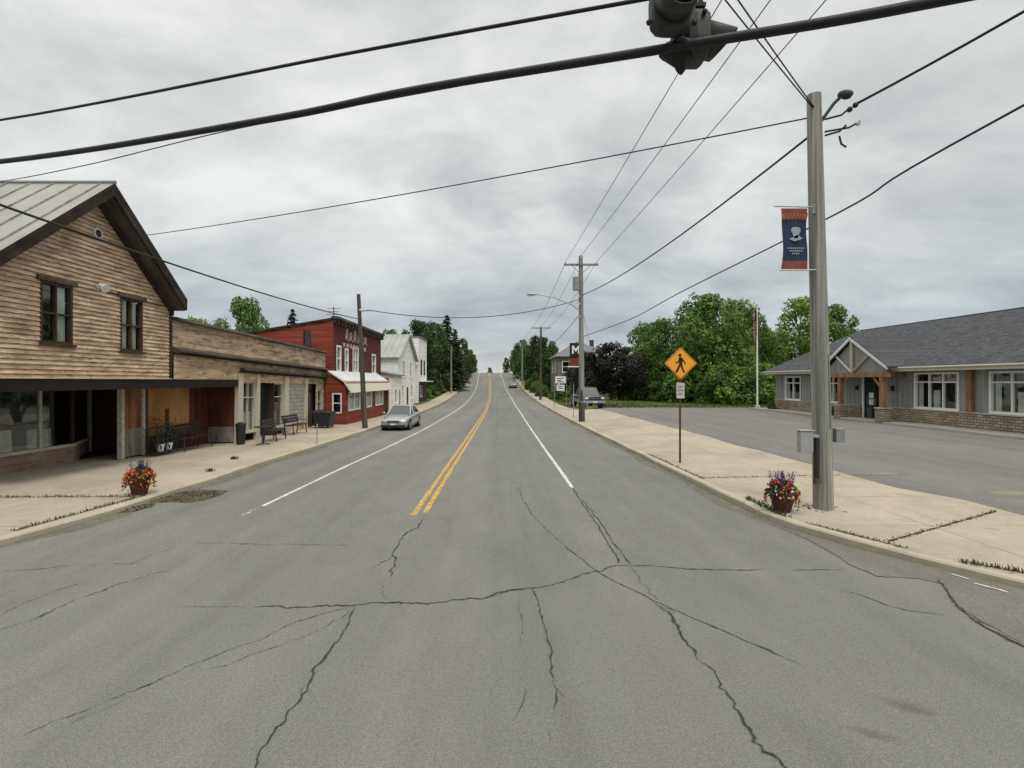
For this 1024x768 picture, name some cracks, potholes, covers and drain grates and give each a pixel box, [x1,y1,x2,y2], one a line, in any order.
pothole [150,489,228,503]
crack [255,478,795,768]
